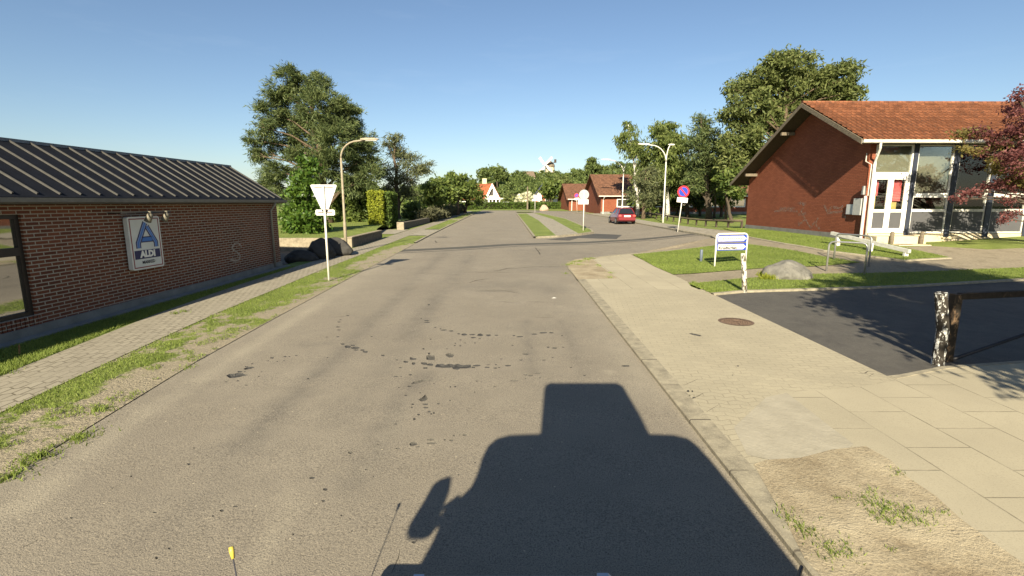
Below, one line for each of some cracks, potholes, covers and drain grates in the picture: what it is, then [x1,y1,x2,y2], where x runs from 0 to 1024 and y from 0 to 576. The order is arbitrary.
manhole cover [718,318,755,326]
